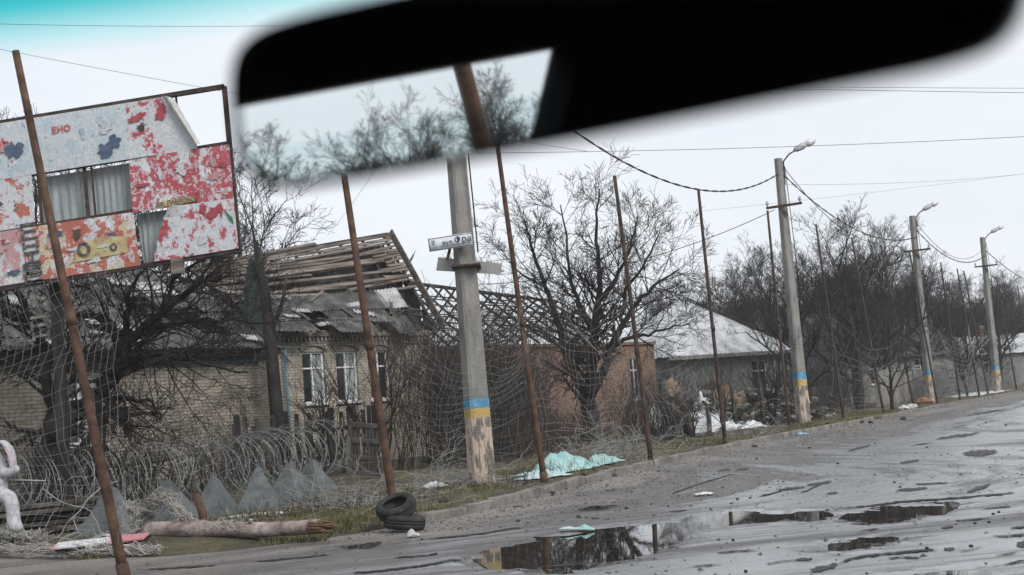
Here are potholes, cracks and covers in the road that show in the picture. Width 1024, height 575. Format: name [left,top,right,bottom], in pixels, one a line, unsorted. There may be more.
pothole [963,449,998,457]
crack [759,484,821,497]
